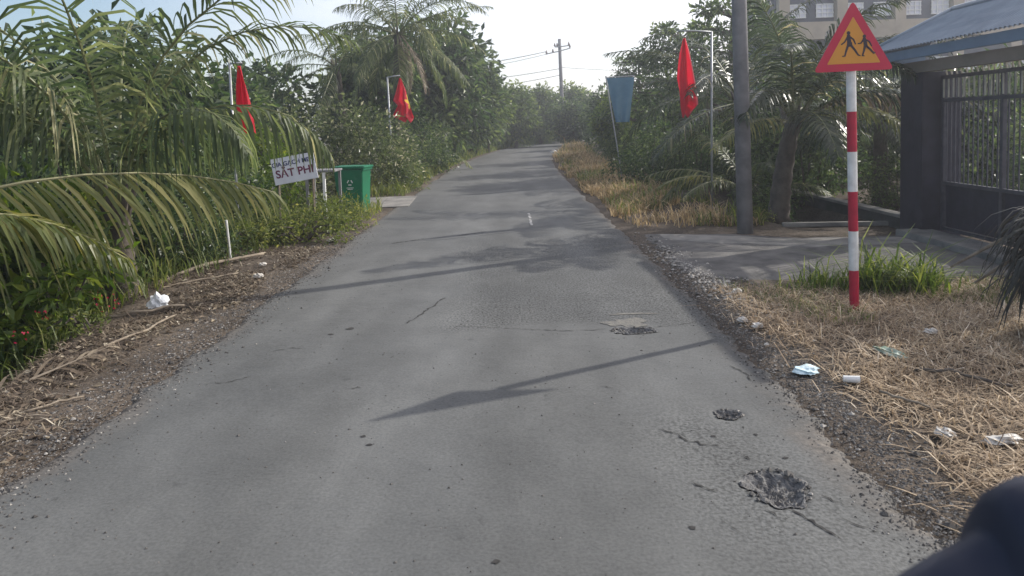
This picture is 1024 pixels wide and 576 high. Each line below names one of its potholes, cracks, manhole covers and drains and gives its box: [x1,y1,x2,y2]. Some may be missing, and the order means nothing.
pothole [714,408,745,420]
crack [763,495,877,541]
pothole [611,326,659,335]
pothole [738,467,813,509]
